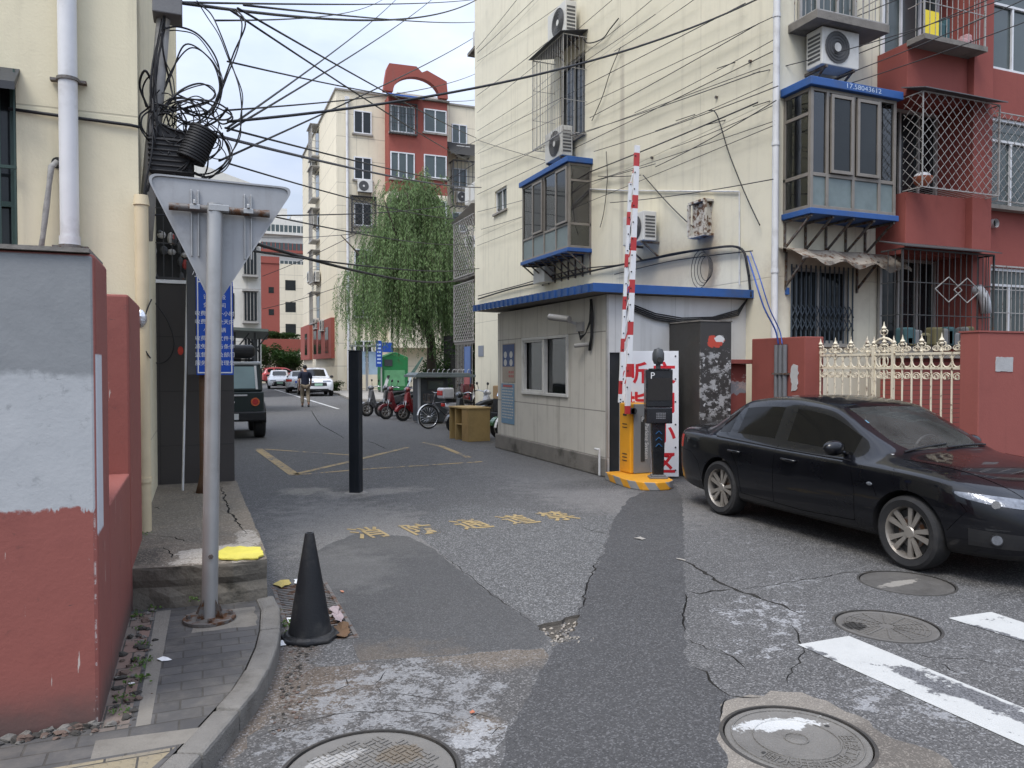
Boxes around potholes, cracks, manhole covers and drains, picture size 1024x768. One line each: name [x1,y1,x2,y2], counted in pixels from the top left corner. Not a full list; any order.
pothole [538,615,580,643]
manhole cover [282,729,461,768]
manhole cover [857,571,959,596]
crack [681,561,1022,718]
crack [578,558,600,611]
drain grate [272,581,359,641]
manhole cover [832,610,945,644]
manhole cover [719,705,879,768]
crack [221,488,246,532]
